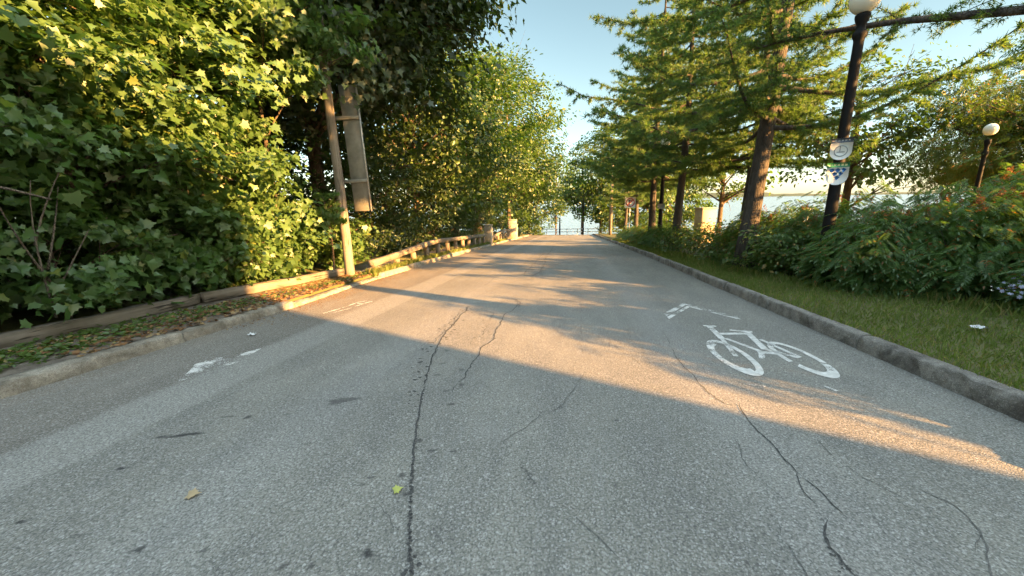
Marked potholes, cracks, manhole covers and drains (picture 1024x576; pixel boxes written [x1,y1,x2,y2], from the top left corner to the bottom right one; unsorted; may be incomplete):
crack [380,299,521,576]
crack [664,334,1014,576]
crack [499,467,620,559]
crack [501,374,584,442]
